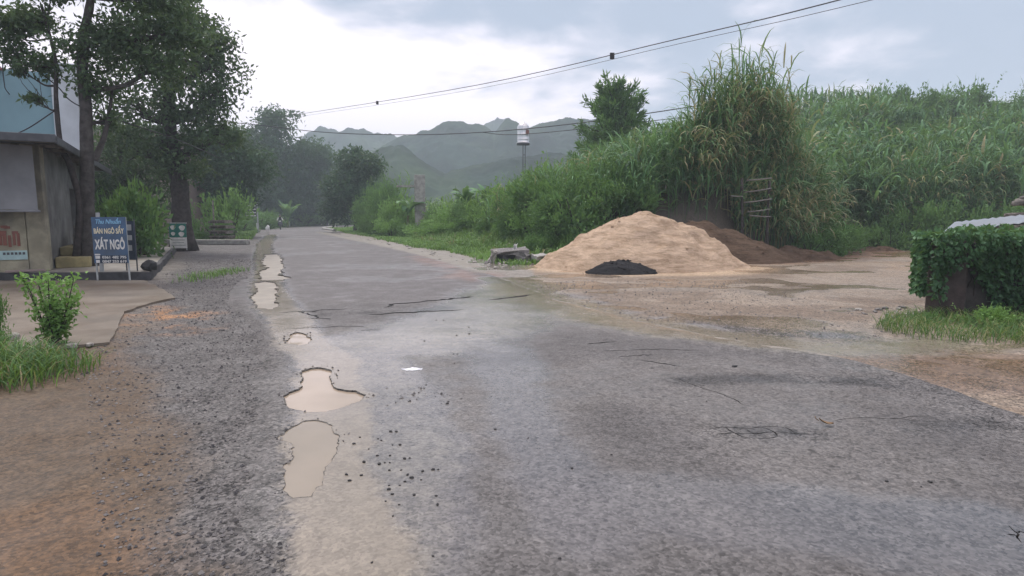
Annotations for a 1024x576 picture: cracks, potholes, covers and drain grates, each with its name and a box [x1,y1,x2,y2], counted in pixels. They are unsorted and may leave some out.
crack [281,295,528,331]
pothole [256,254,291,280]
pothole [250,281,279,309]
crack [713,426,797,438]
pothole [277,420,340,498]
pothole [283,367,365,412]
crack [589,341,740,403]
pothole [285,332,312,345]
